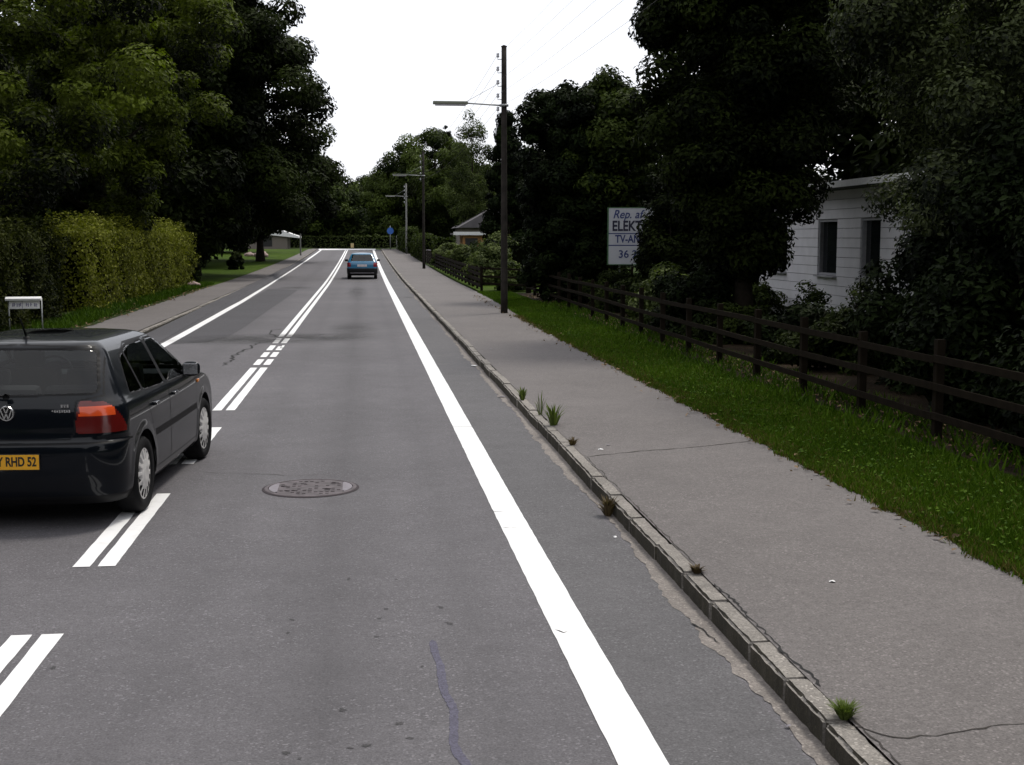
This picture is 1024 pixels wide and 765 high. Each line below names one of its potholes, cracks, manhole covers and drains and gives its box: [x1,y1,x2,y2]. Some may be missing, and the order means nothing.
crack [224,329,279,365]
manhole cover [262,479,359,498]
crack [837,717,1024,765]
